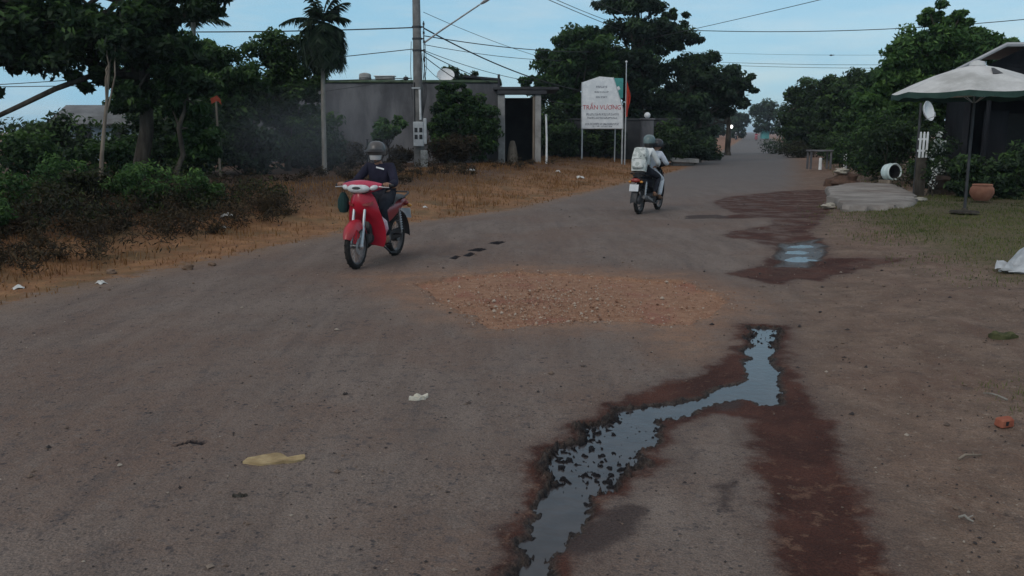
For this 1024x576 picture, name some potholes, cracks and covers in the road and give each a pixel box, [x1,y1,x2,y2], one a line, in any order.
pothole [769,238,832,269]
pothole [490,324,794,576]
